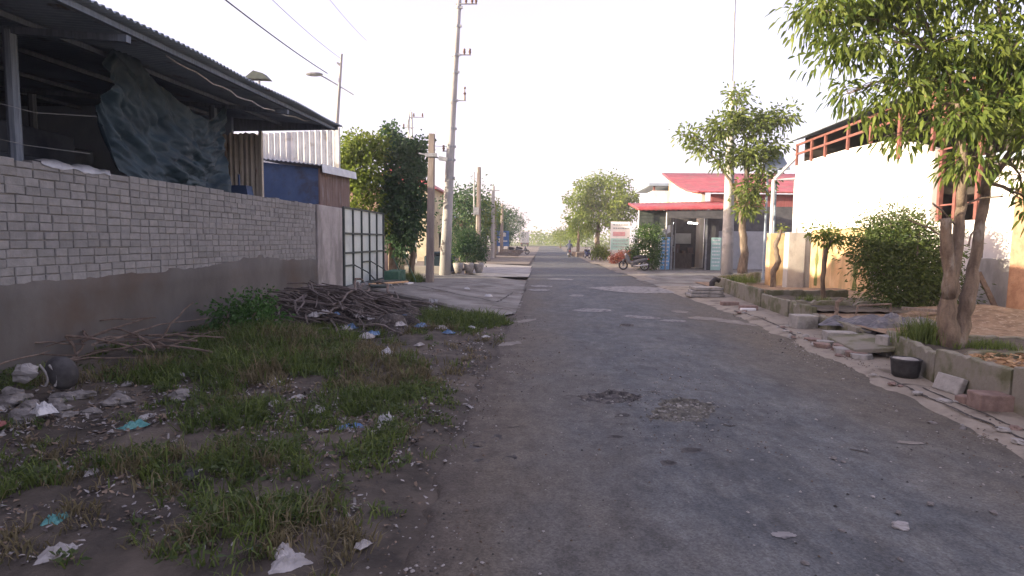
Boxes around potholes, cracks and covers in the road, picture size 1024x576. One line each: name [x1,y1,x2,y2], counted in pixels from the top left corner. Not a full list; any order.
pothole [637,394,734,429]
pothole [562,388,652,409]
